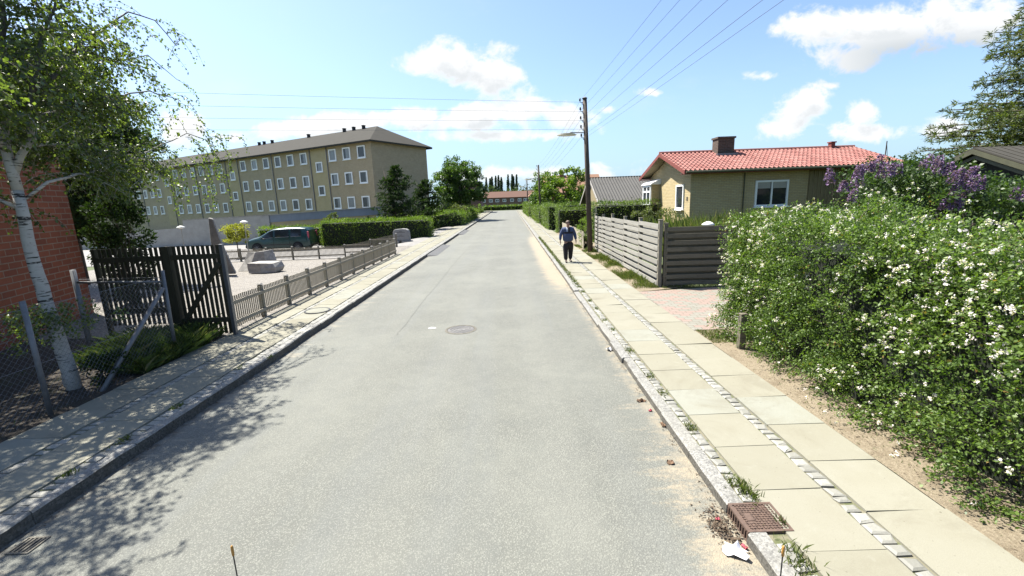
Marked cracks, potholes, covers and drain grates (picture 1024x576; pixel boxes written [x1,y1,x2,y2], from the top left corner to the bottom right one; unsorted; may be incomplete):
drain grate [4,536,51,555]
manhole cover [445,325,477,334]
